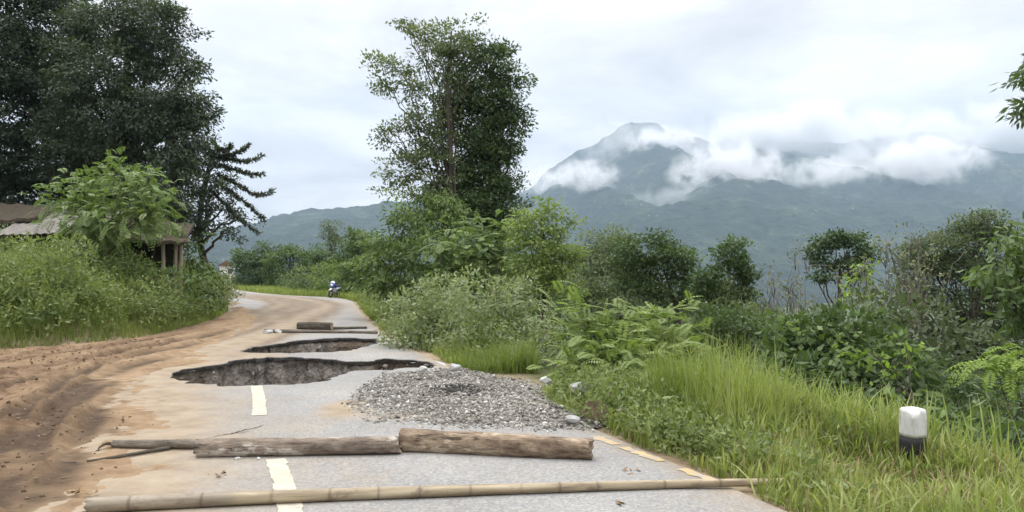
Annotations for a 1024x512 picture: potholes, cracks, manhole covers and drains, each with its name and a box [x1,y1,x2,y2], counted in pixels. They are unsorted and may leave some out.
pothole [241,338,385,365]
pothole [170,357,436,387]
